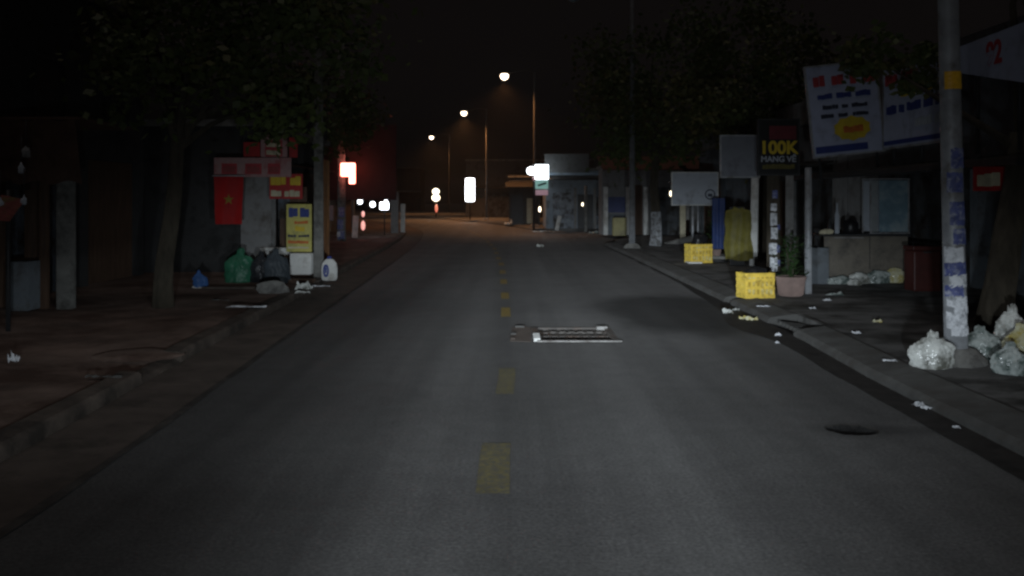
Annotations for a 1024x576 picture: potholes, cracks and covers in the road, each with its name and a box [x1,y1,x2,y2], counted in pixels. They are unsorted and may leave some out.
pothole [824,424,879,436]
